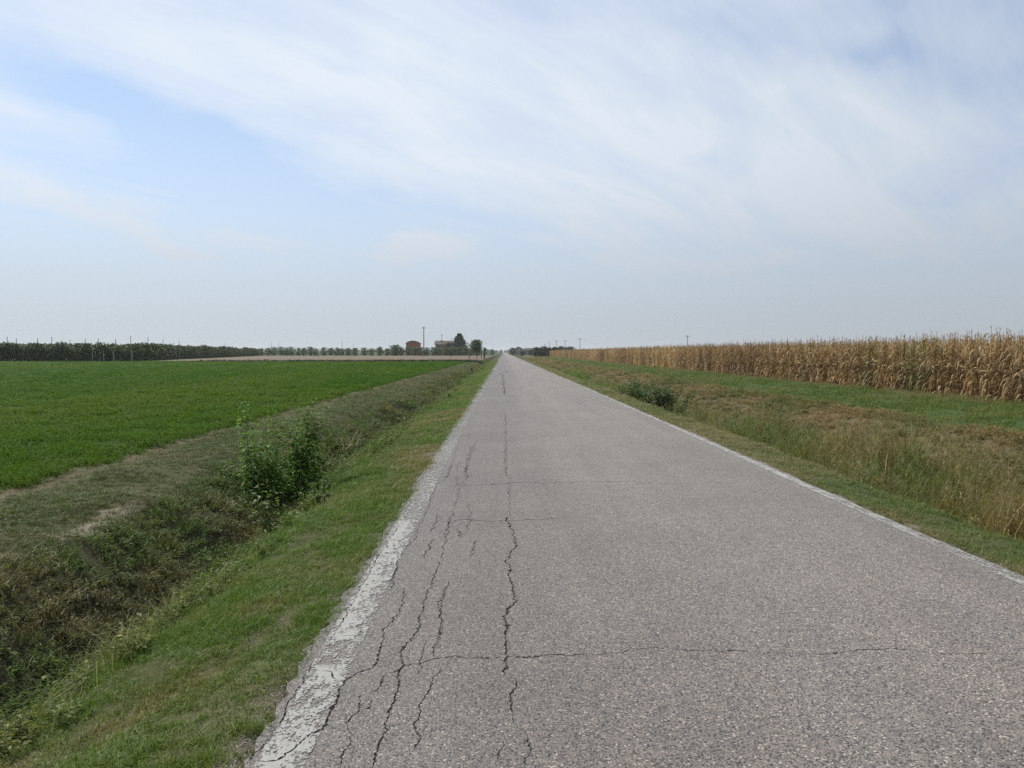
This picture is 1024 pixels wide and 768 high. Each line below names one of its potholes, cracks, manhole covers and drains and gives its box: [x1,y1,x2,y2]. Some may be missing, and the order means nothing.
crack [249,418,1012,768]
